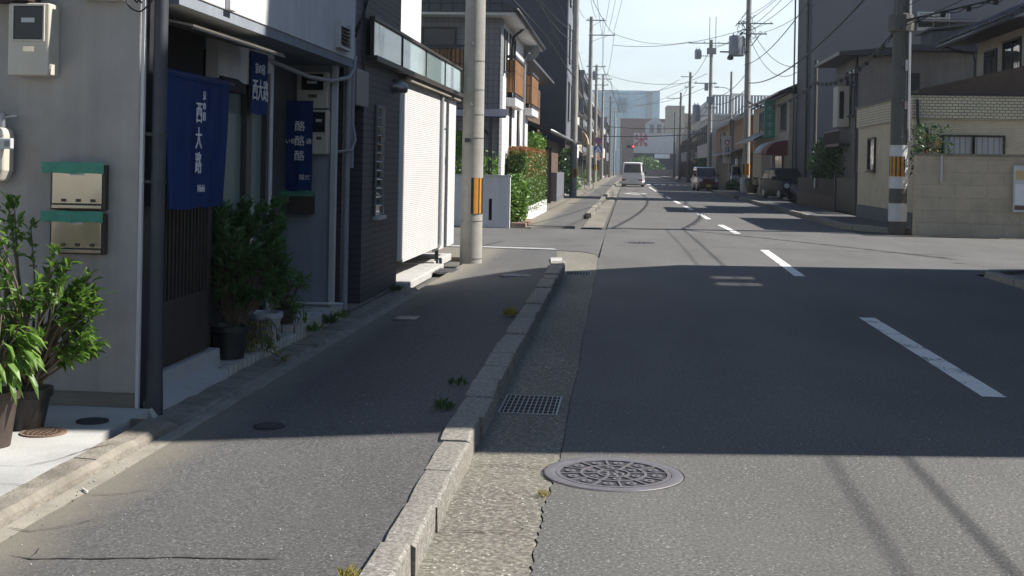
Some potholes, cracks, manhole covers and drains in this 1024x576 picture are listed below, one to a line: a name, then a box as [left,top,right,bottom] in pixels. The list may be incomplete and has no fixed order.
manhole cover [542,457,685,492]
manhole cover [20,427,67,438]
manhole cover [76,417,109,425]
drain grate [497,394,563,416]
manhole cover [253,422,285,430]
